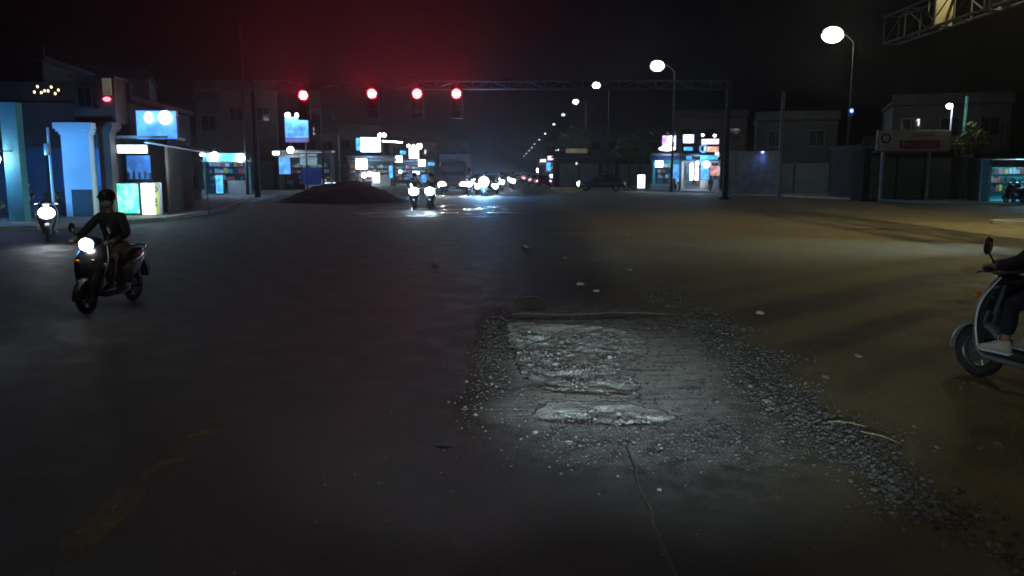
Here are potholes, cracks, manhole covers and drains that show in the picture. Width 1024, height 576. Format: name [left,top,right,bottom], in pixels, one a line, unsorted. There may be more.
pothole [503,322,654,396]
pothole [531,400,679,427]
crack [626,444,678,576]
